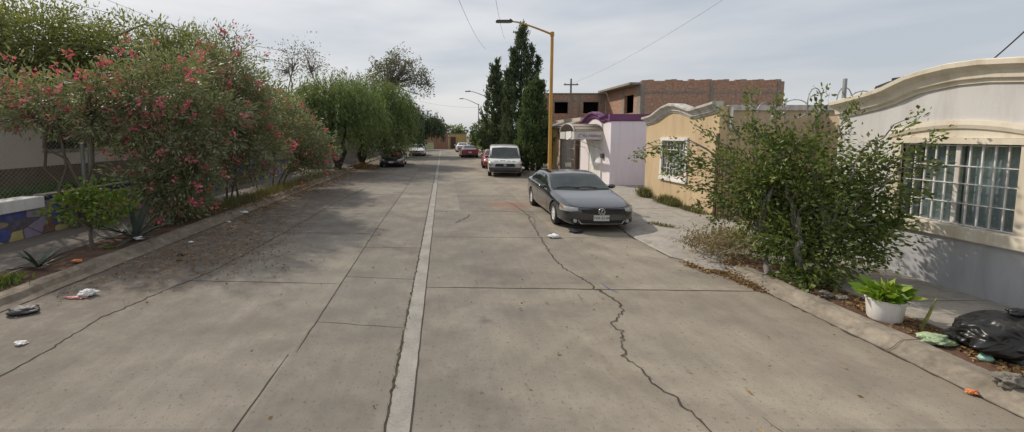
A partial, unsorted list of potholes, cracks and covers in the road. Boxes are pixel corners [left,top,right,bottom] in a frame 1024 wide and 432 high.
crack [491,203,712,432]
